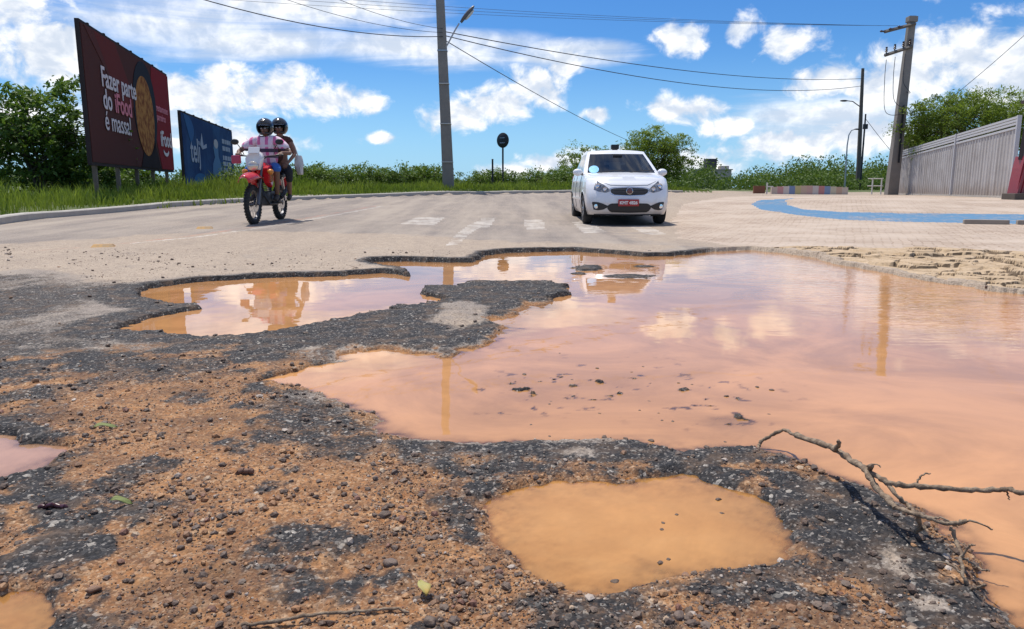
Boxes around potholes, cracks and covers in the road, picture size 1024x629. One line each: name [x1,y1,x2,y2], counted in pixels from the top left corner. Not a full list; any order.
pothole [0,558,114,629]
pothole [93,247,671,340]
pothole [0,419,113,492]
pothole [226,245,1024,629]
